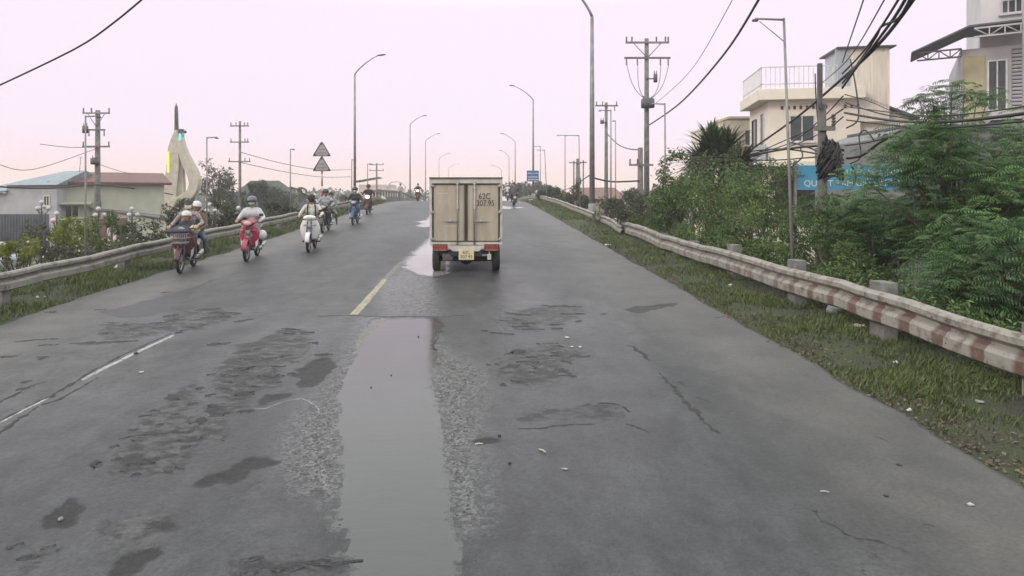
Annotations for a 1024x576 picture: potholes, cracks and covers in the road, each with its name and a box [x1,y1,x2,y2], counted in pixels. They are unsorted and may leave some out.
crack [814,511,934,554]
crack [518,345,720,434]
